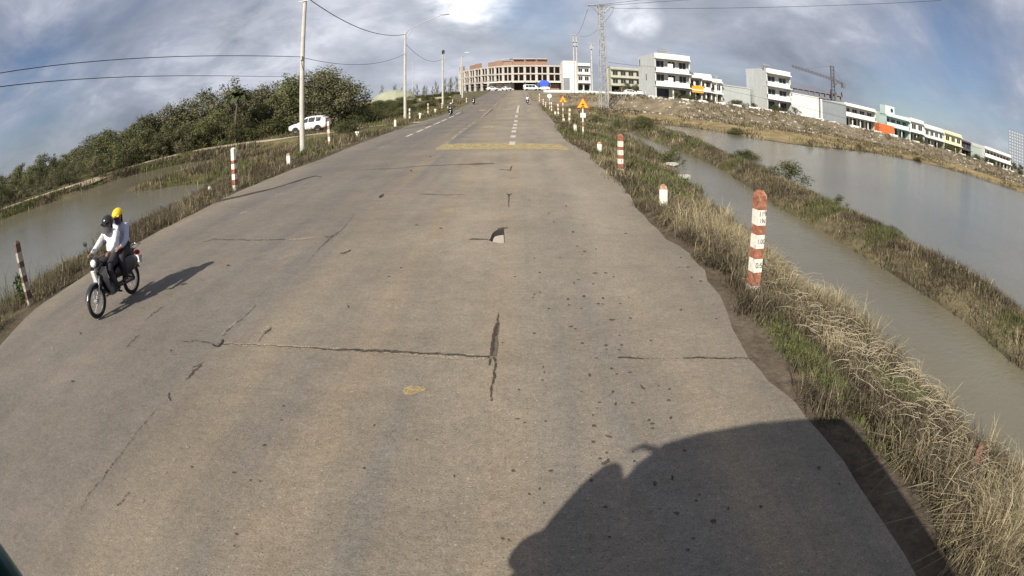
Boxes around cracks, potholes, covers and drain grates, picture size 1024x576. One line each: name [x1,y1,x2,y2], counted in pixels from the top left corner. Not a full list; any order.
crack [203,216,353,254]
pothole [489,229,505,243]
crack [81,363,202,510]
crack [184,310,499,401]
